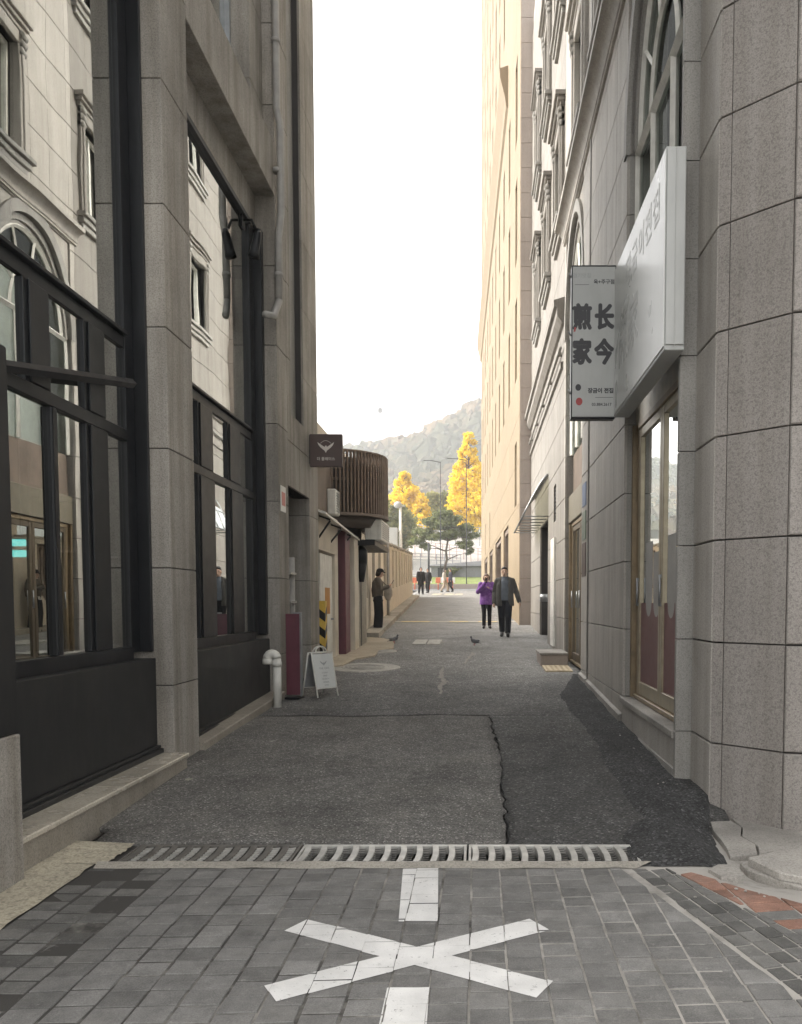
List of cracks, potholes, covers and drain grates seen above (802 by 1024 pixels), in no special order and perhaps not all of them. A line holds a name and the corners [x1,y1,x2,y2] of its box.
drain grate [468,844,641,861]
drain grate [293,844,467,862]
drain grate [118,844,303,862]
crack [297,714,510,844]
manhole cover [334,663,401,672]
